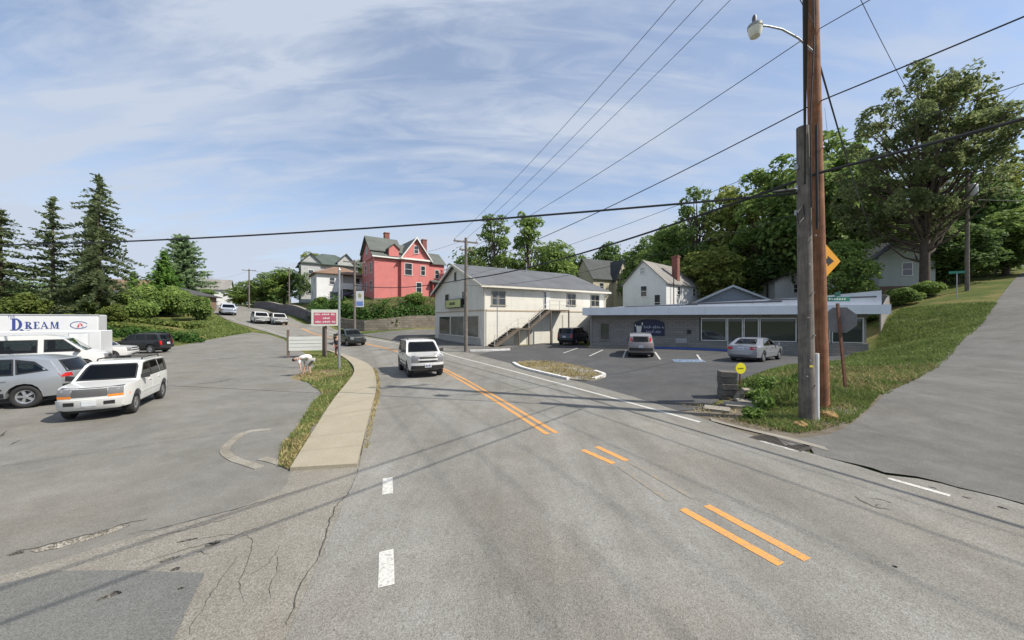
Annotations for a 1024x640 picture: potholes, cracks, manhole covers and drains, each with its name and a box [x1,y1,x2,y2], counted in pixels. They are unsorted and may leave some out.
crack [129,492,292,634]
pothole [30,524,129,552]
drain grate [750,434,813,452]
